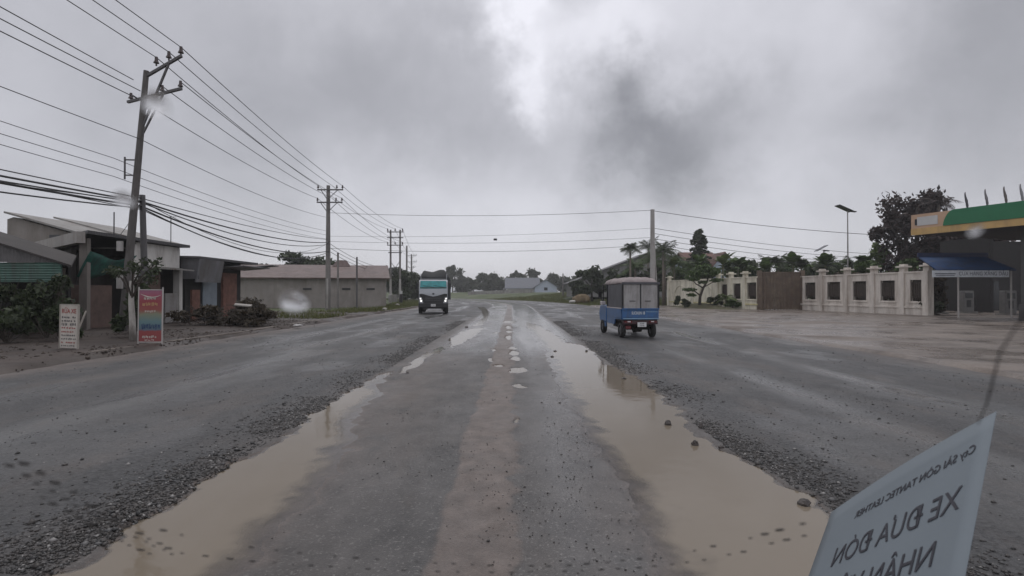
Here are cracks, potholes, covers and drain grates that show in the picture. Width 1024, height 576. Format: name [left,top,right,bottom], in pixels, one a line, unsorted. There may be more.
pothole [524,321,834,576]
pothole [396,346,446,374]
pothole [31,369,399,576]
pothole [447,327,484,349]
